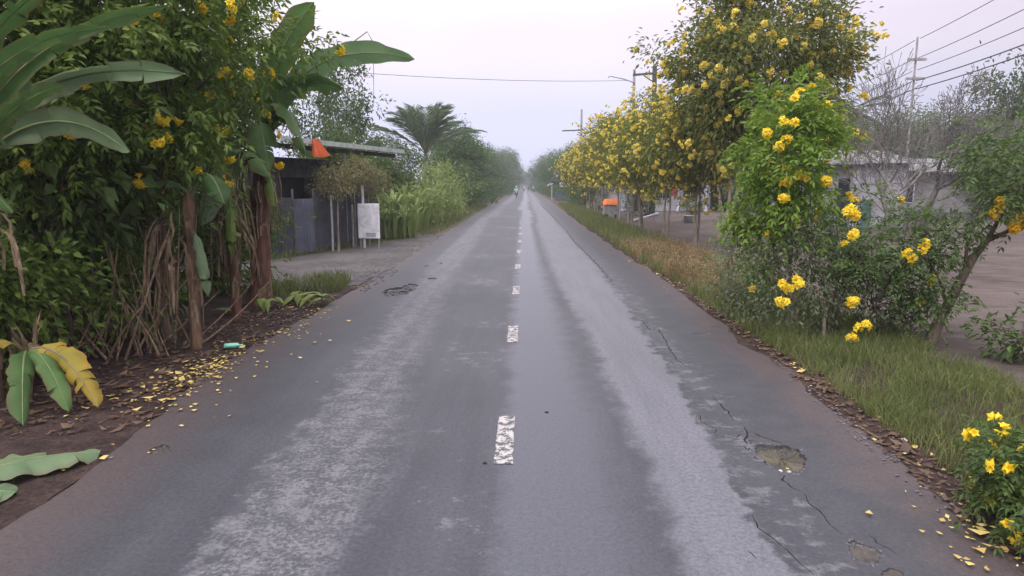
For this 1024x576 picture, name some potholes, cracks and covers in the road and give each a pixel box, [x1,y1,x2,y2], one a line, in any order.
pothole [381,283,419,297]
pothole [881,567,904,576]
pothole [846,538,884,567]
crack [781,476,841,533]
pothole [753,442,808,475]
crack [747,515,813,574]
crack [700,397,783,460]
